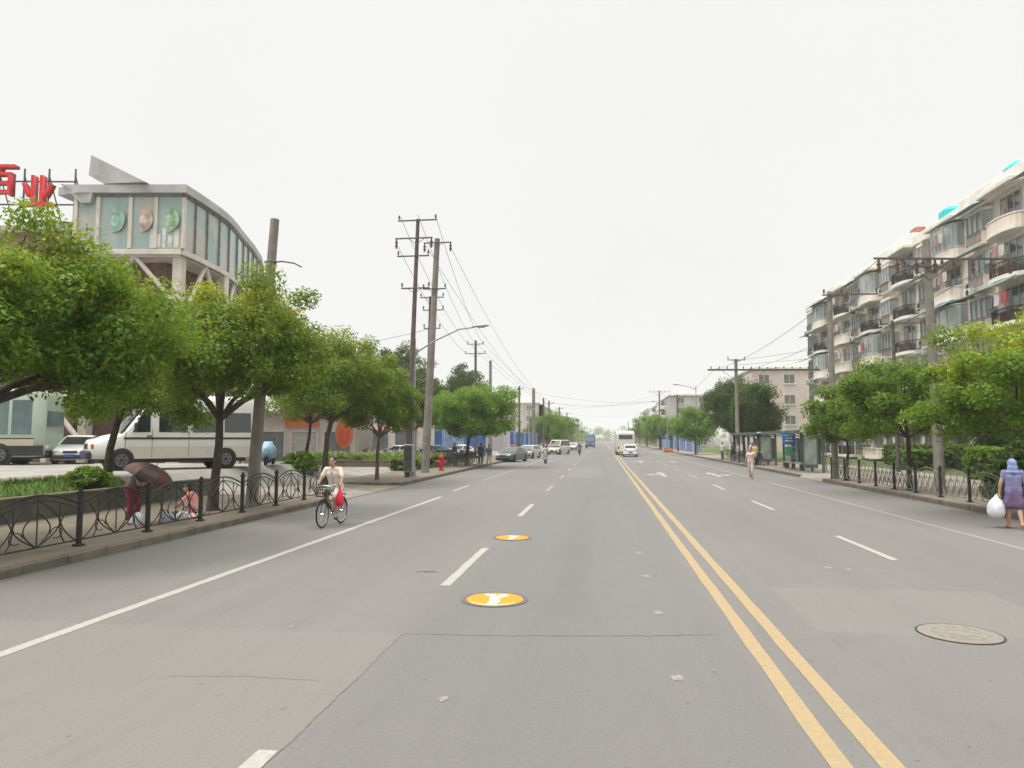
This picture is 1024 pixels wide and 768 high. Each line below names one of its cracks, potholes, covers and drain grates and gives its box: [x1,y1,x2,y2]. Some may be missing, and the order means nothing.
manhole cover [461,592,528,607]
manhole cover [915,623,1007,645]
